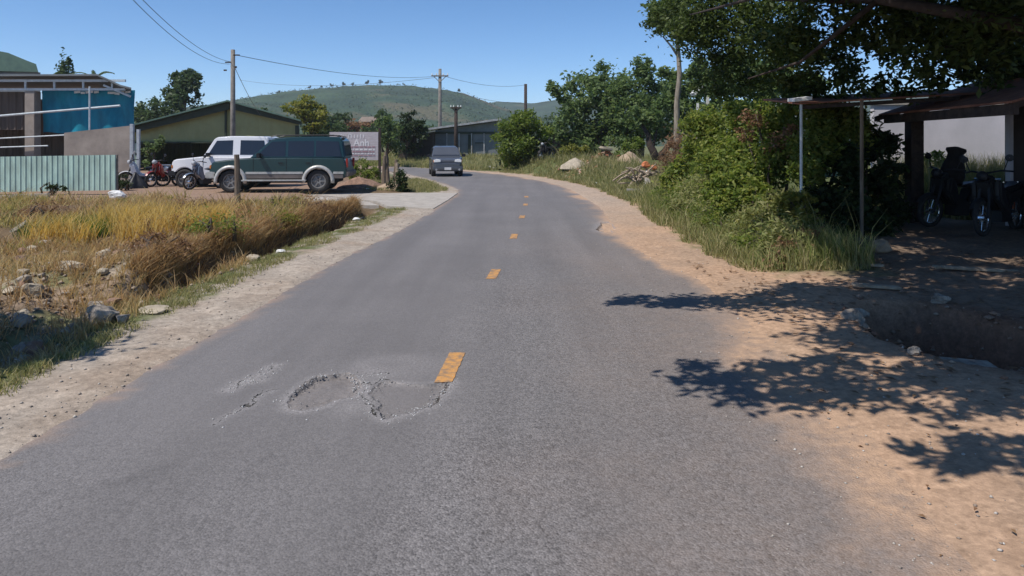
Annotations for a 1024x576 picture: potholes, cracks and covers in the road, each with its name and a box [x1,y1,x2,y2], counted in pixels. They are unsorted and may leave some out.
crack [213,366,278,425]
pothole [286,372,363,410]
